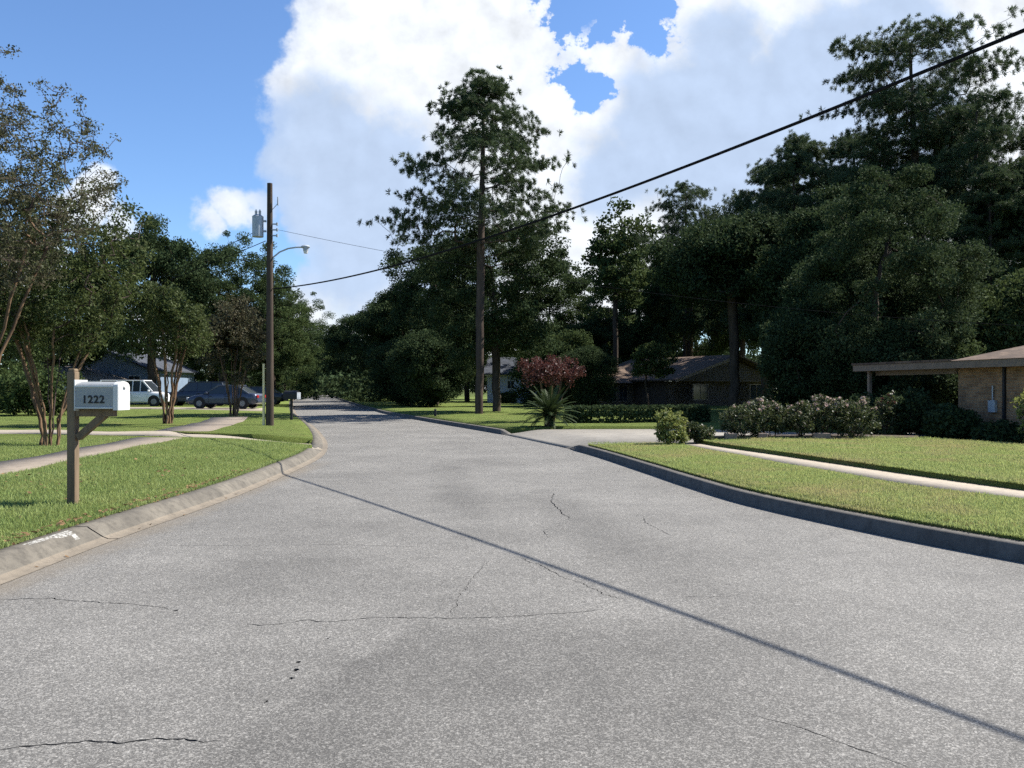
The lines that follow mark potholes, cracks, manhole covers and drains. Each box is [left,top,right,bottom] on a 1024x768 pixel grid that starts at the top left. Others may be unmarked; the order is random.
crack [750,713,909,768]
crack [231,558,620,627]
crack [2,738,221,750]
crack [2,598,172,610]
